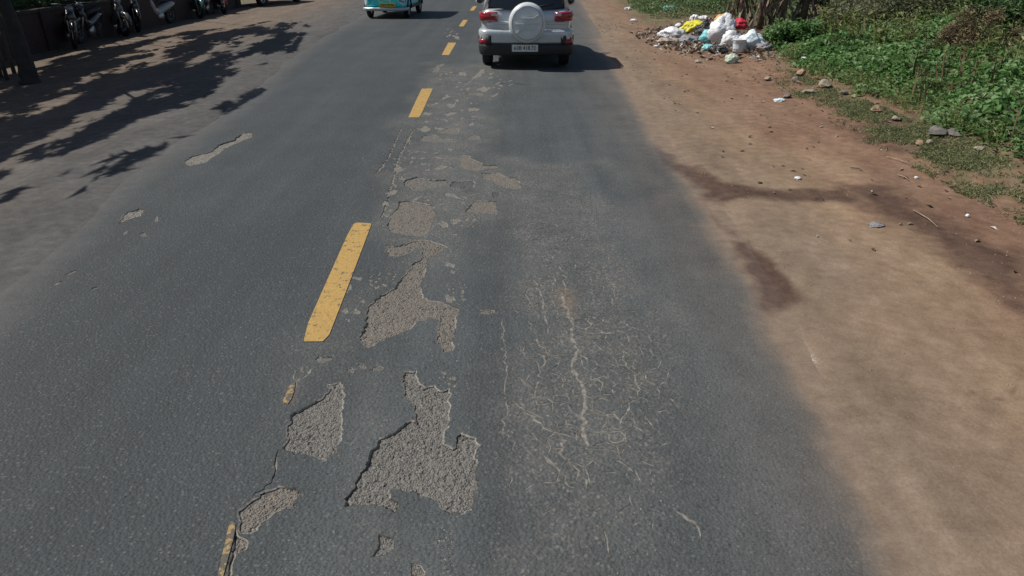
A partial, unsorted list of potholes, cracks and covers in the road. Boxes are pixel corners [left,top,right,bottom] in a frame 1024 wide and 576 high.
pothole [184,132,253,166]
pothole [445,282,467,303]
pothole [118,208,145,224]
pothole [458,155,498,171]
pothole [403,177,448,191]
pothole [342,370,481,515]
crack [377,128,416,218]
crack [254,451,278,494]
crack [632,507,701,538]
pothole [282,382,346,462]
pothole [236,485,302,535]
pothole [358,240,461,353]
